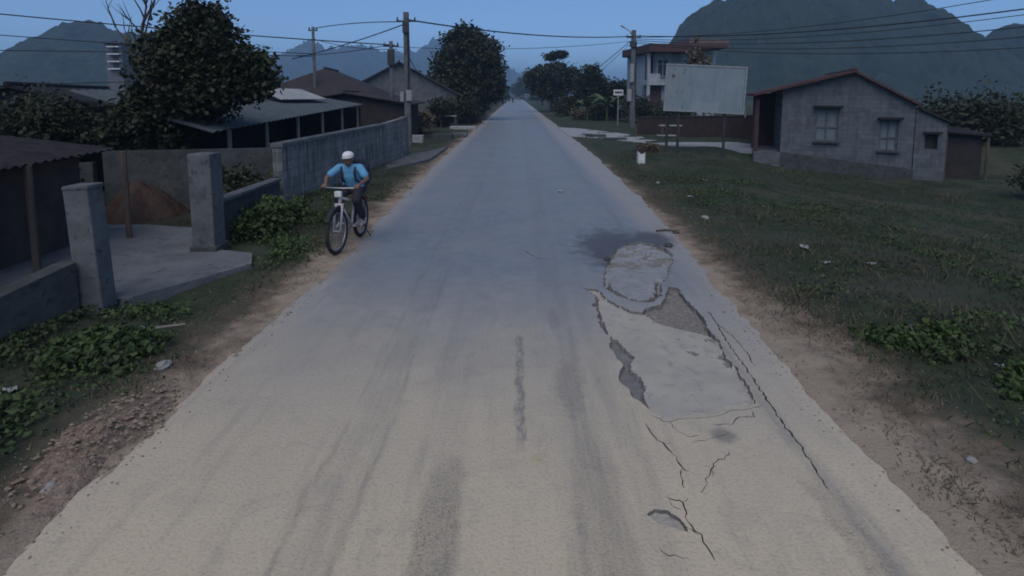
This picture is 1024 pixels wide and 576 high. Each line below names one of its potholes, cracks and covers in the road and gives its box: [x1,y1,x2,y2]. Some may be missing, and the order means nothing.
pothole [647,509,688,532]
pothole [580,287,755,420]
crack [646,312,828,560]
